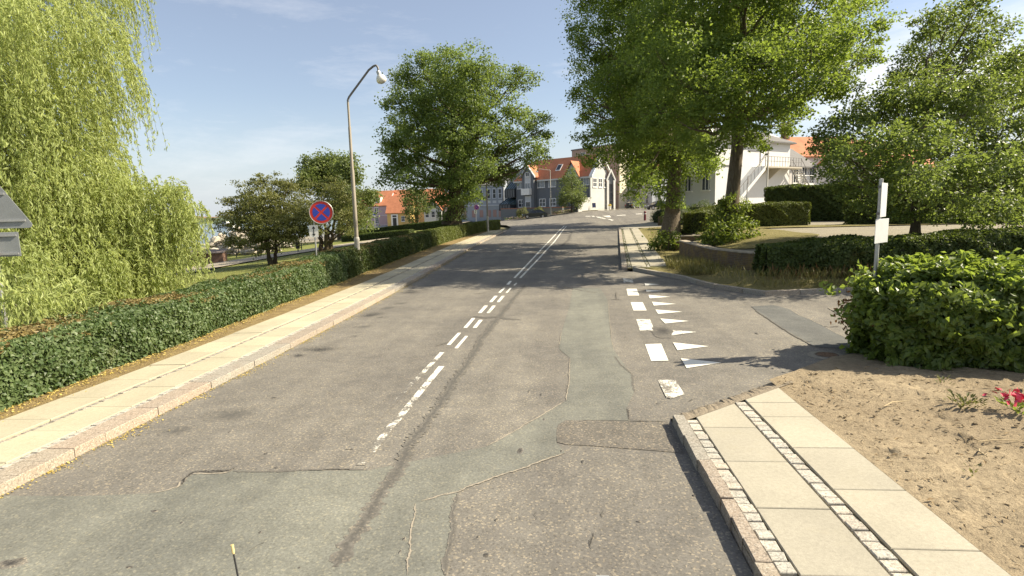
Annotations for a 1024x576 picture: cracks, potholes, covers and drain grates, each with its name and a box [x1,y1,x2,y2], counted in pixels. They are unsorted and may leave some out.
crack [151,467,236,493]
crack [405,336,571,573]
crack [562,286,635,392]
manhole cover [807,351,843,360]
